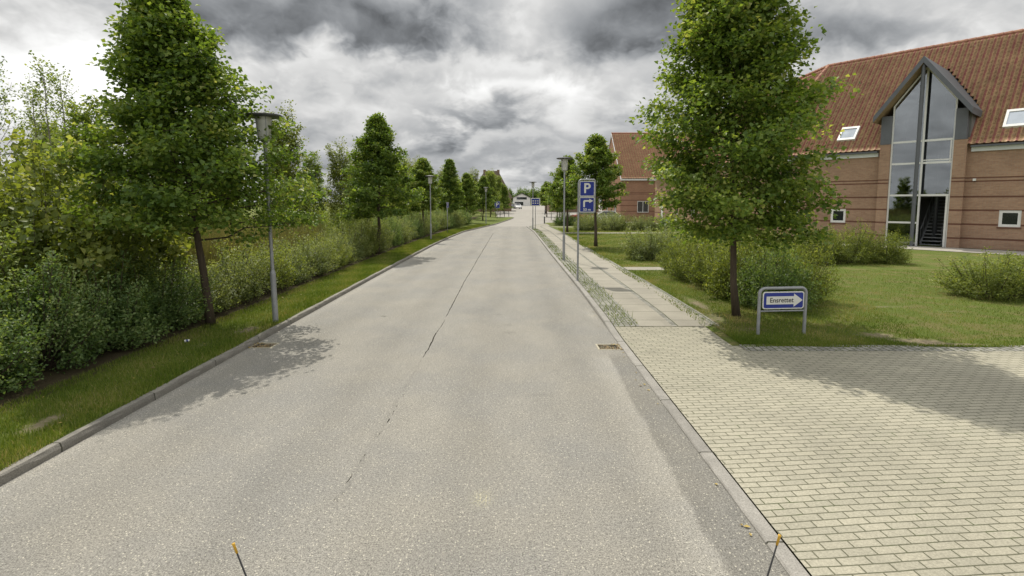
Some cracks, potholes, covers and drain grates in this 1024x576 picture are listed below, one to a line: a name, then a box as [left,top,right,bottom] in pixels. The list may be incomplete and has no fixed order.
crack [334,239,490,500]
